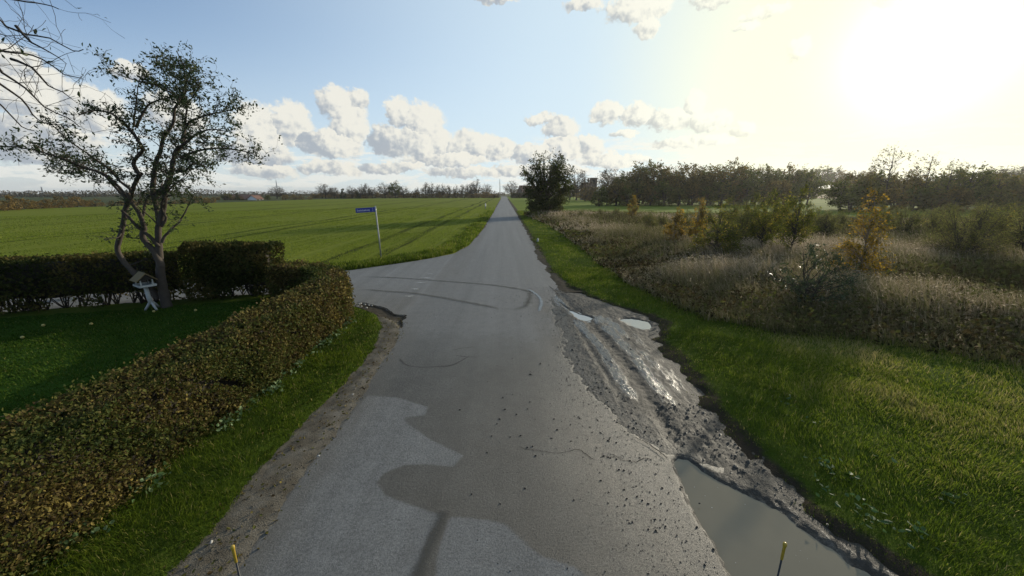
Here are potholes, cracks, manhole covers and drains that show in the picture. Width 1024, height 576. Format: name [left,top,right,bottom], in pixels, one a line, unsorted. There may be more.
pothole [671,455,898,576]
crack [519,438,667,462]
pothole [356,302,405,328]
pothole [617,317,653,330]
